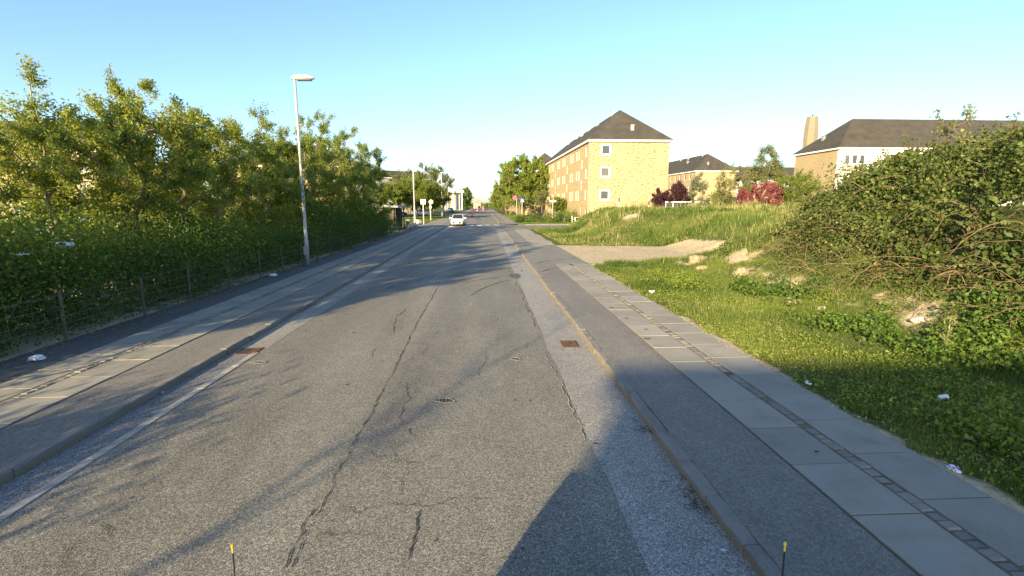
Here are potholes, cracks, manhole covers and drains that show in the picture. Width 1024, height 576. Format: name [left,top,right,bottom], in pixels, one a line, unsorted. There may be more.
crack [282,285,487,574]
crack [545,354,586,439]
